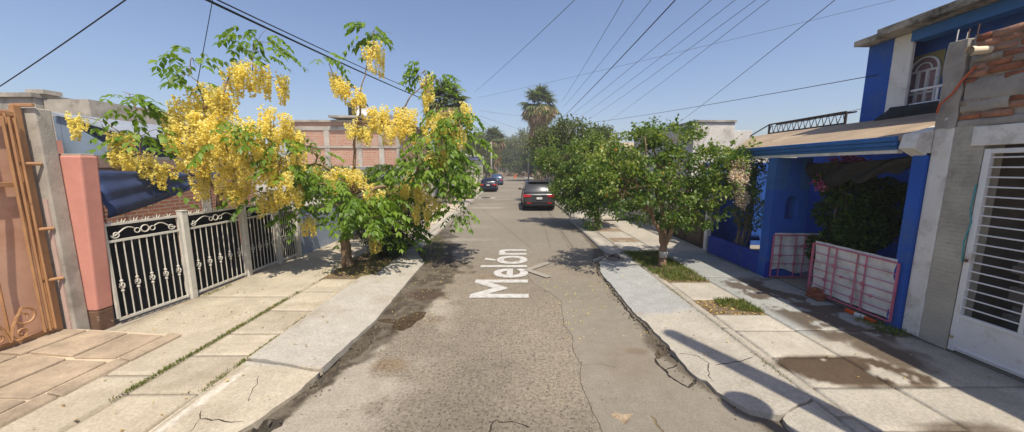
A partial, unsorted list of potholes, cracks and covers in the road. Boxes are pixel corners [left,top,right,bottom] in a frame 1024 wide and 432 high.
crack [531,280,604,431]
crack [654,353,752,388]
crack [190,412,244,432]
crack [489,420,529,432]
